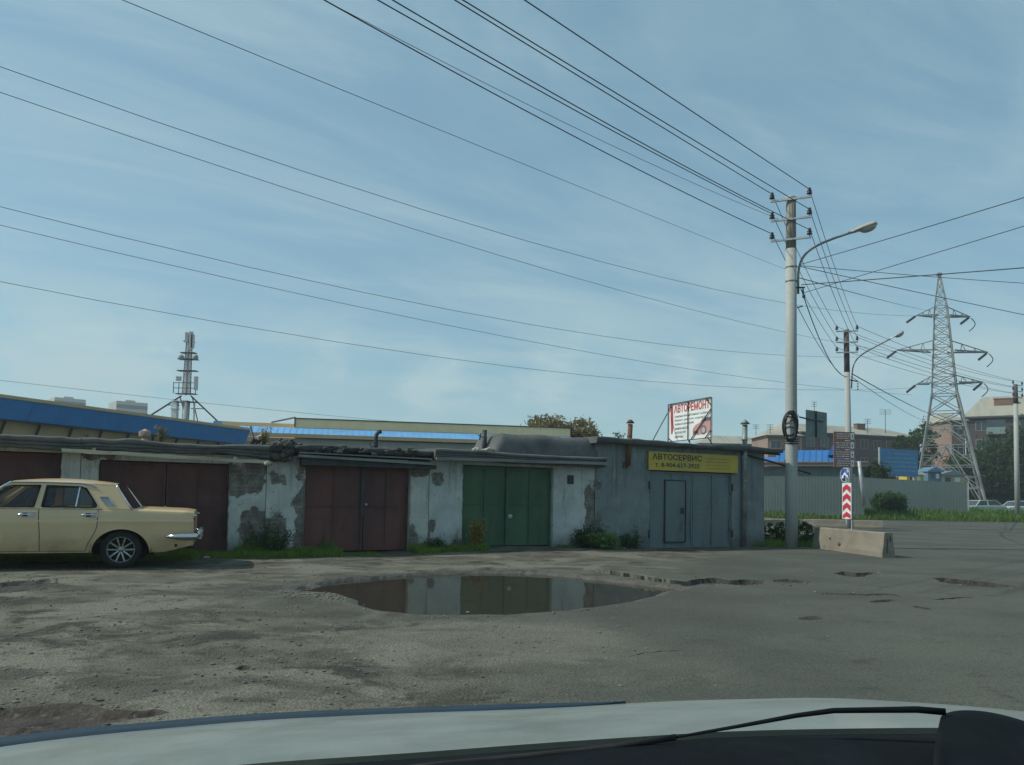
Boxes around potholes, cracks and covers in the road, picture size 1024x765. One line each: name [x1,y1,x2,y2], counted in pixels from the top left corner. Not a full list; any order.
pothole [282,568,694,615]
pothole [933,578,1016,587]
pothole [689,578,766,586]
